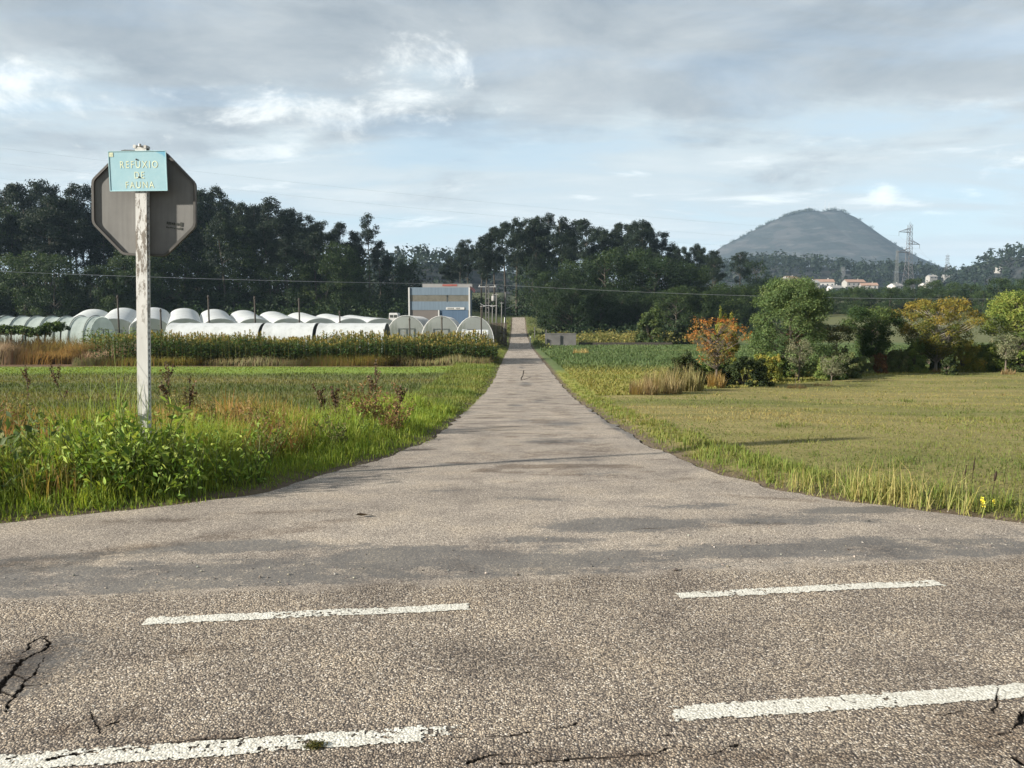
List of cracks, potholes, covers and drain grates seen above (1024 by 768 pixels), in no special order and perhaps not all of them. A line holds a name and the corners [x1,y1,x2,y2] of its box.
crack [0,635,77,712]
crack [89,712,120,733]
crack [936,689,1024,766]
crack [450,731,740,765]
